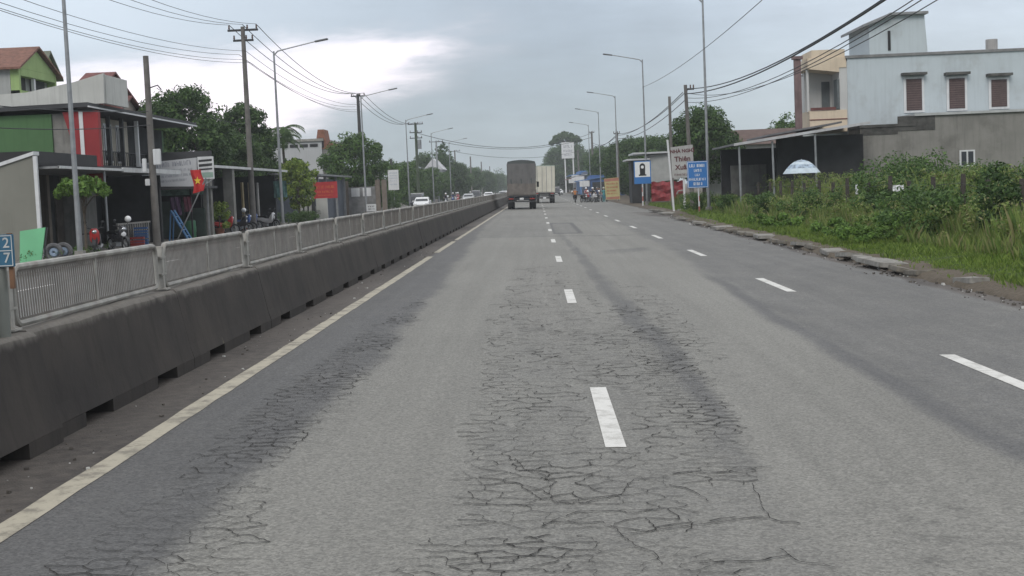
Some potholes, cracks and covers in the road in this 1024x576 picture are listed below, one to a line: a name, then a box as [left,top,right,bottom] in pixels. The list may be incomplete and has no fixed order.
crack [41,482,271,576]
crack [179,302,424,479]
crack [389,266,834,576]
